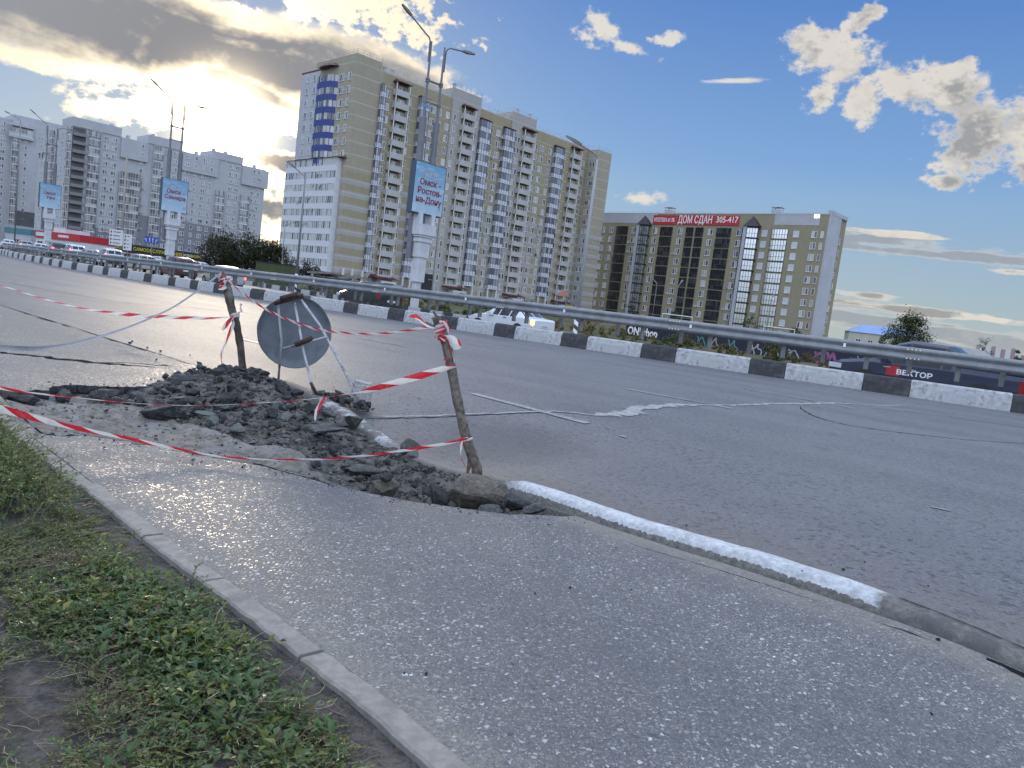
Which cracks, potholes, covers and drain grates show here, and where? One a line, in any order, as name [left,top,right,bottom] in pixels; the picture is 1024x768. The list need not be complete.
pothole [0,370,553,516]
crack [0,352,178,368]
